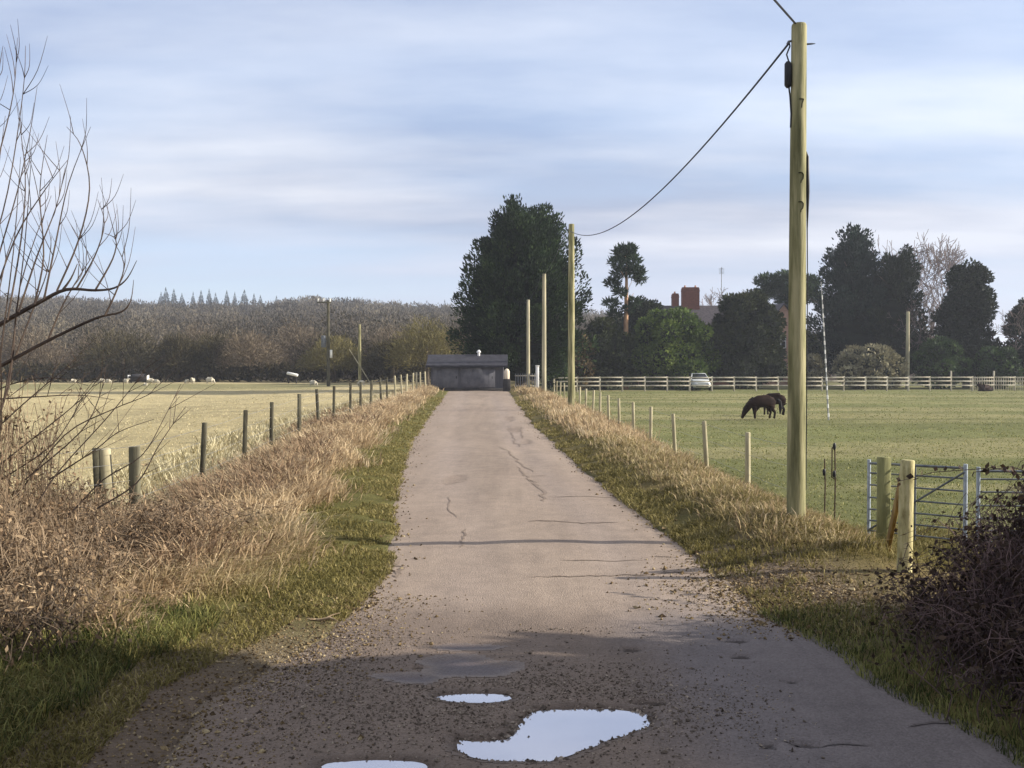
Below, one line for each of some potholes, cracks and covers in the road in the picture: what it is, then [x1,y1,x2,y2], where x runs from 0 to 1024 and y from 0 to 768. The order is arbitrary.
pothole [423,686,529,704]
crack [447,497,467,547]
pothole [441,700,667,764]
crack [526,556,703,577]
crack [500,427,615,501]
